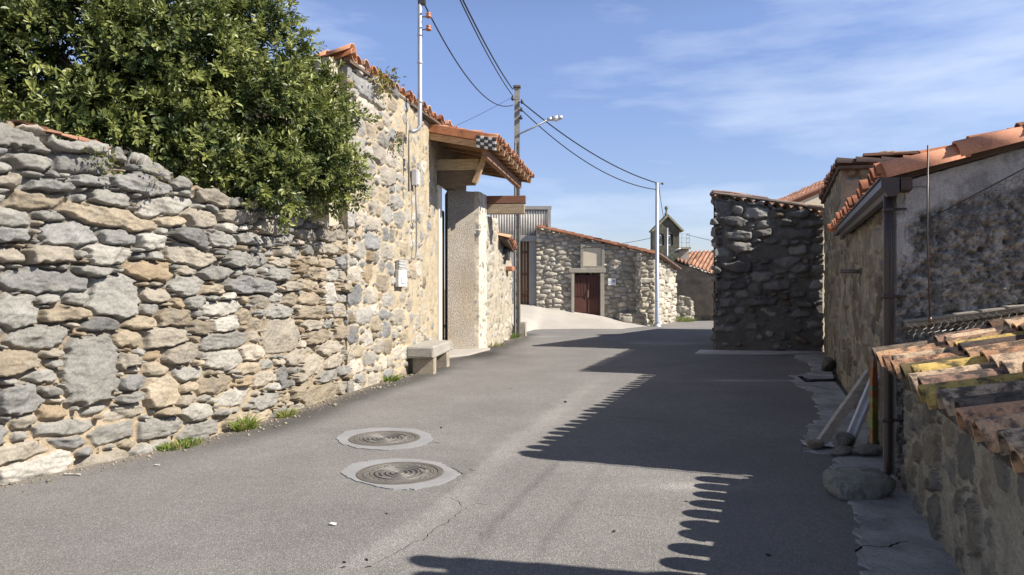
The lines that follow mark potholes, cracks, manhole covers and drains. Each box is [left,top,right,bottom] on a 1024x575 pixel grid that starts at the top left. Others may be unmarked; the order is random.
manhole cover [340,458,461,491]
manhole cover [336,428,433,451]
crack [354,497,488,572]
crack [855,541,907,552]
